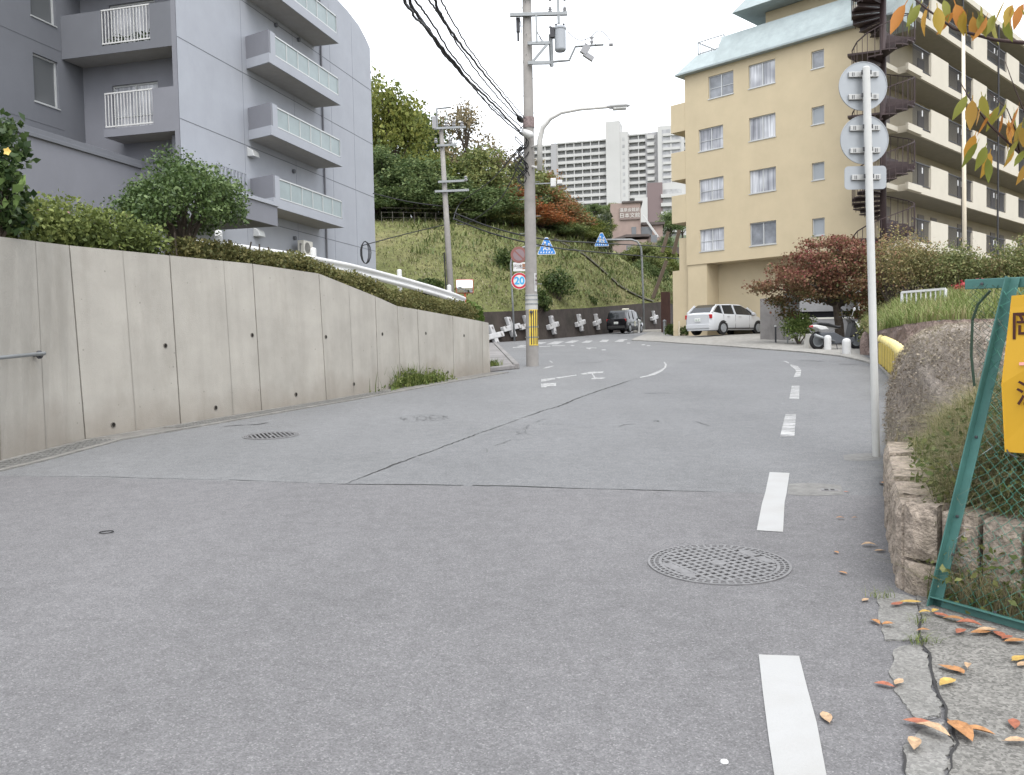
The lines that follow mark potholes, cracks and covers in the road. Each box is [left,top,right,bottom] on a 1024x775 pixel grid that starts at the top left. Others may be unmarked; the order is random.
manhole cover [648,544,792,585]
crack [888,611,960,774]
